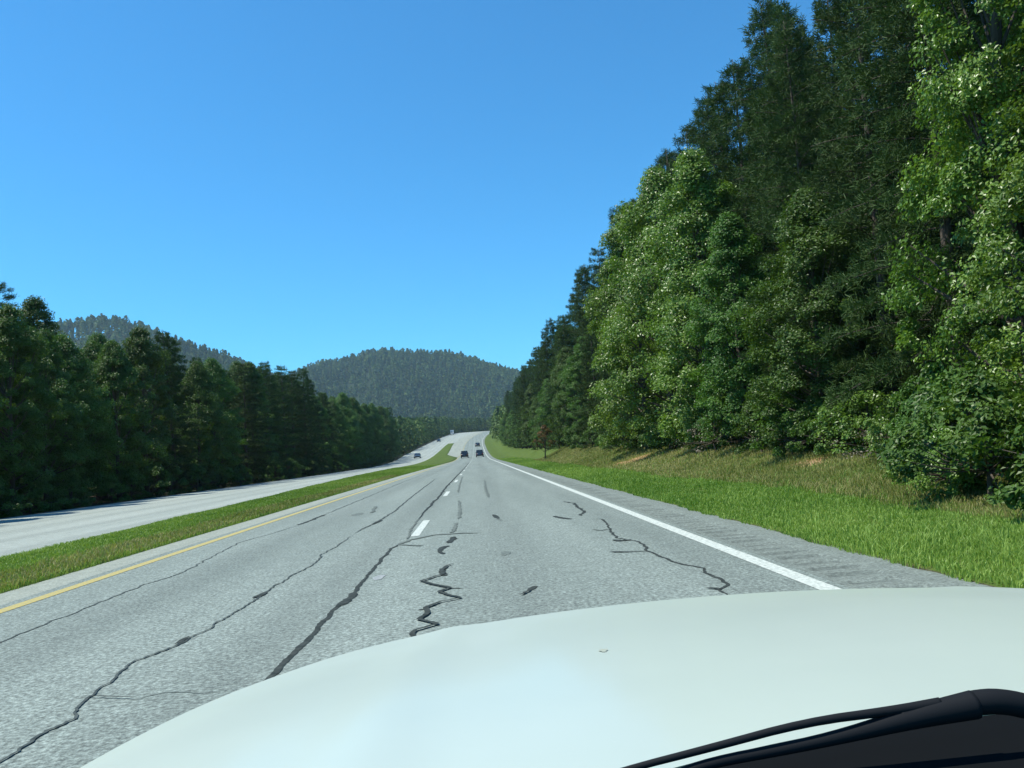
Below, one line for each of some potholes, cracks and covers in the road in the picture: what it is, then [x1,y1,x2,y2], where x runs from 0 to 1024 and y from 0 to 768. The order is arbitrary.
crack [553,502,730,595]
